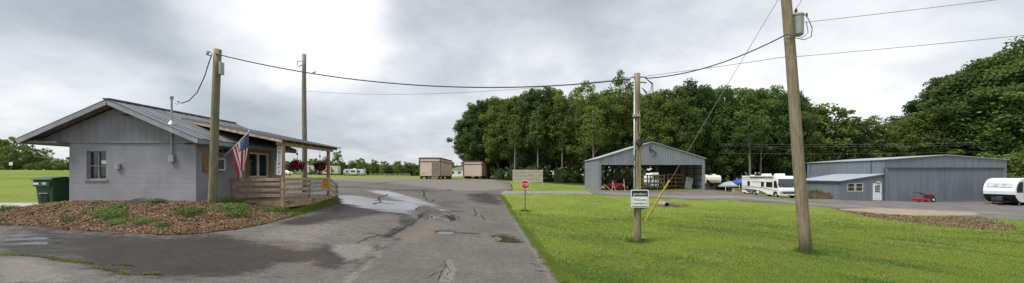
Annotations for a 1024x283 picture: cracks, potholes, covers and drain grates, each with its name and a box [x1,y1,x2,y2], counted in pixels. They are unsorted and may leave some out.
pothole [436,214,461,222]
pothole [410,206,445,220]
pothole [491,234,528,244]
crack [359,180,485,243]
